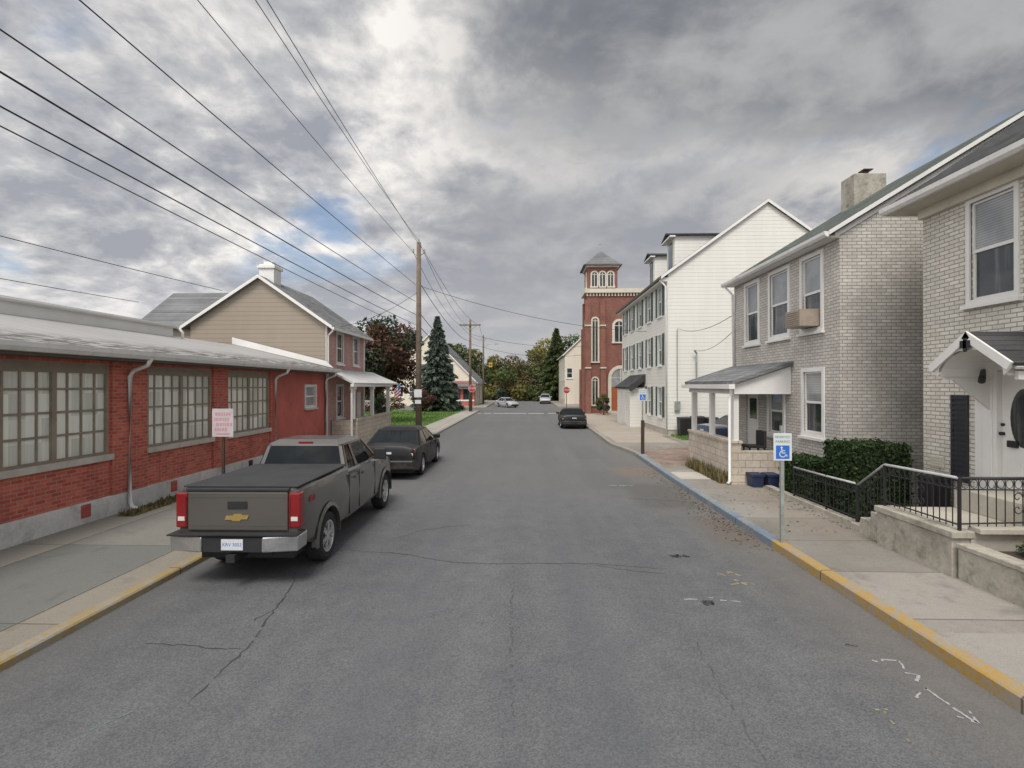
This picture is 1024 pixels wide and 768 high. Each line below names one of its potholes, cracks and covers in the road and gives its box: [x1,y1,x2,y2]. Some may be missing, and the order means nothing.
crack [697,641,767,761]
crack [339,525,668,717]
crack [148,572,296,701]
